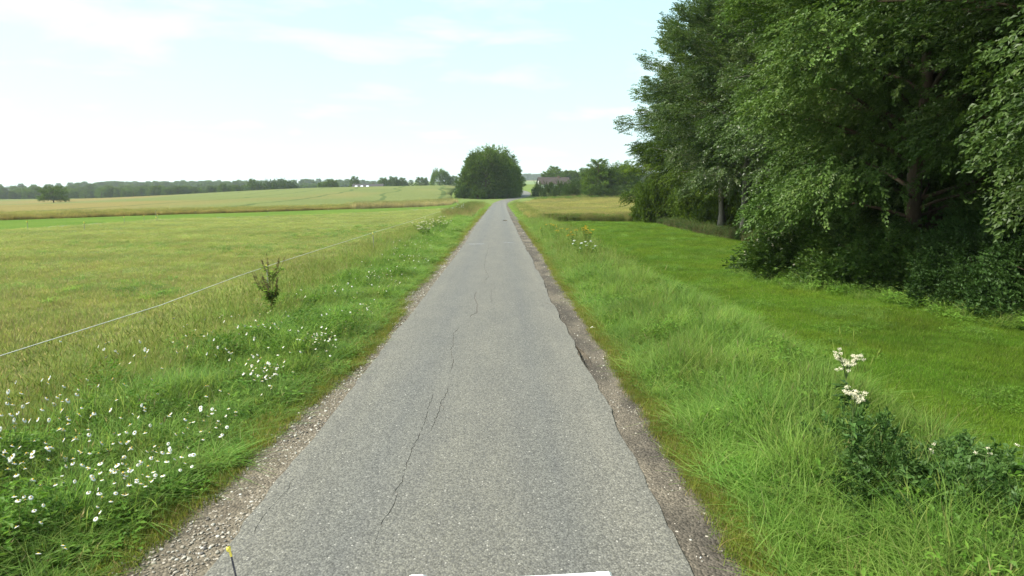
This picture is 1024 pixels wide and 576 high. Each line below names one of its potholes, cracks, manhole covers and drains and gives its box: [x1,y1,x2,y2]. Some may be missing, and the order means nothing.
crack [377,389,448,537]
crack [450,245,492,372]
